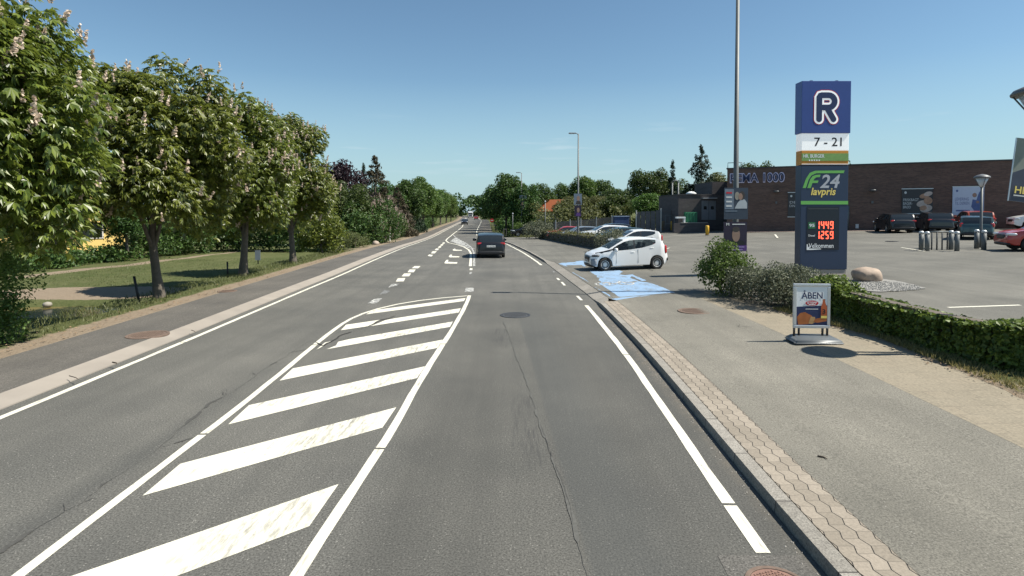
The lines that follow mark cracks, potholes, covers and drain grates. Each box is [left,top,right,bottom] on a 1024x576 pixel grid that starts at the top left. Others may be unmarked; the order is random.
manhole cover [745,566,799,576]
crack [541,426,573,521]
manhole cover [125,330,170,339]
